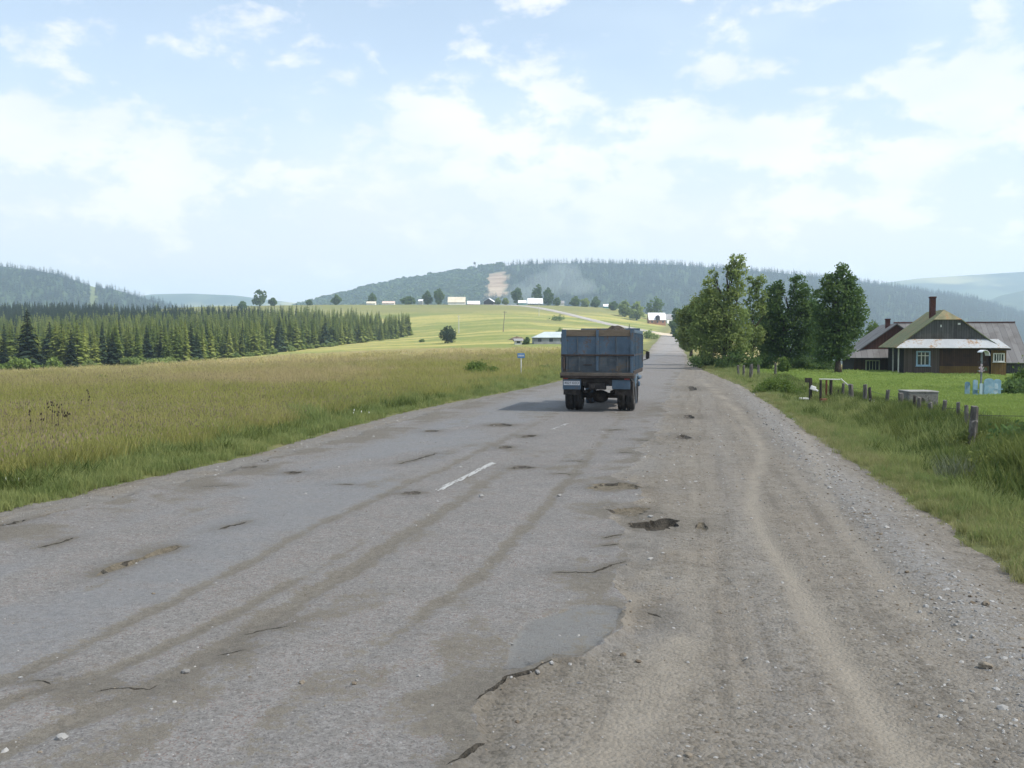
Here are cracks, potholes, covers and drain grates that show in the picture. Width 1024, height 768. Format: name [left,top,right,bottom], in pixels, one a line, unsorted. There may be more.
crack [475,659,558,700]
pothole [96,545,183,576]
pothole [606,507,651,517]
crack [556,534,626,573]
pothole [627,518,679,531]
crack [221,626,287,655]
crack [448,743,485,764]
pothole [587,482,642,491]
